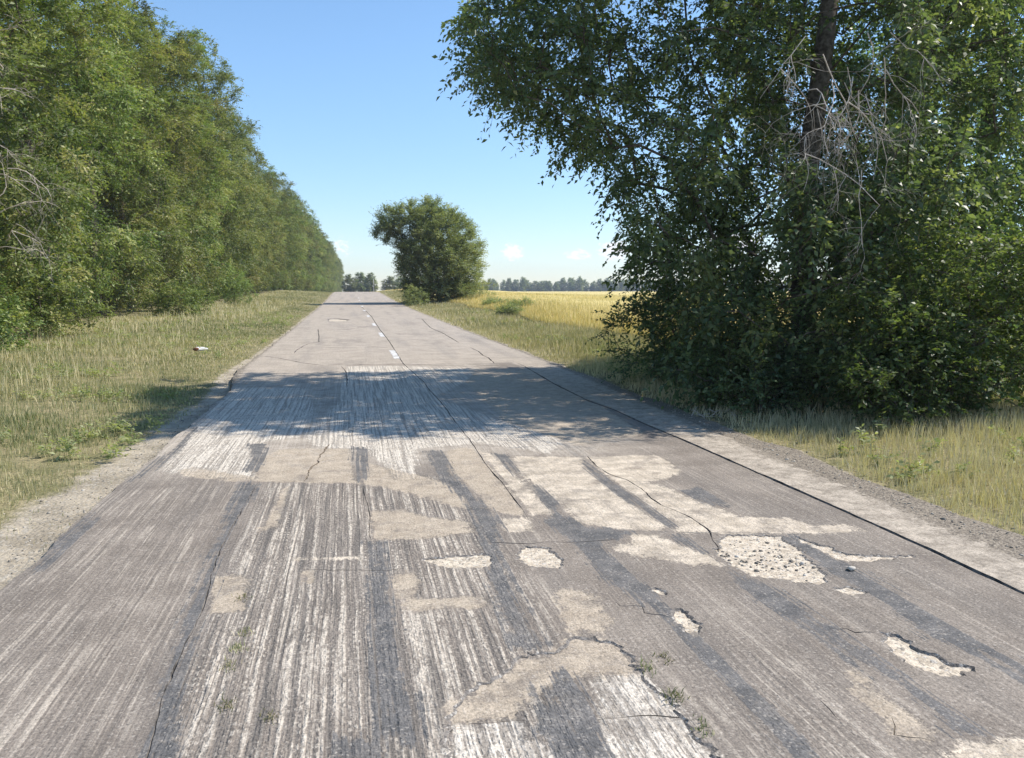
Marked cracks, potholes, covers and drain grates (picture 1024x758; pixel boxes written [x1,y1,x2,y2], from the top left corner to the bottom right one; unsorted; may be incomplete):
pothole [421,553,494,569]
pothole [879,631,976,677]
pothole [515,546,564,569]
pothole [712,534,829,585]
pothole [670,608,703,633]
crack [266,307,1024,618]
